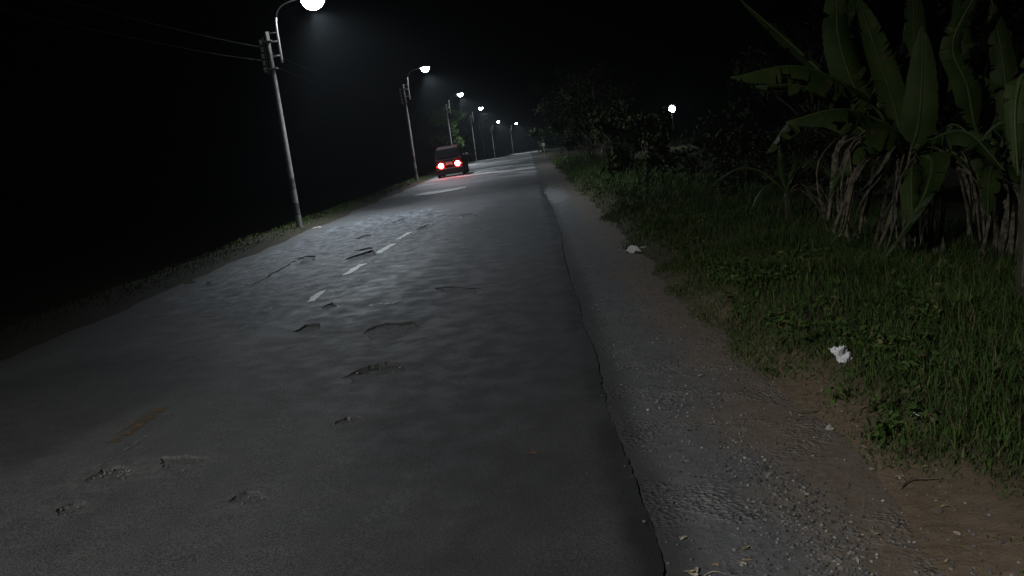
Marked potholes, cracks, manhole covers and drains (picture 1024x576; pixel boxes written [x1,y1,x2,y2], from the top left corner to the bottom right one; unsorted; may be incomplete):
pothole [227,490,269,506]
pothole [363,321,420,340]
pothole [345,250,377,262]
pothole [296,256,316,265]
pothole [85,464,135,486]
crack [549,202,667,576]
pothole [335,416,364,427]
pothole [55,501,87,516]
pothole [435,286,481,295]
pothole [159,455,209,476]
pothole [293,323,321,334]
pothole [342,361,406,384]
